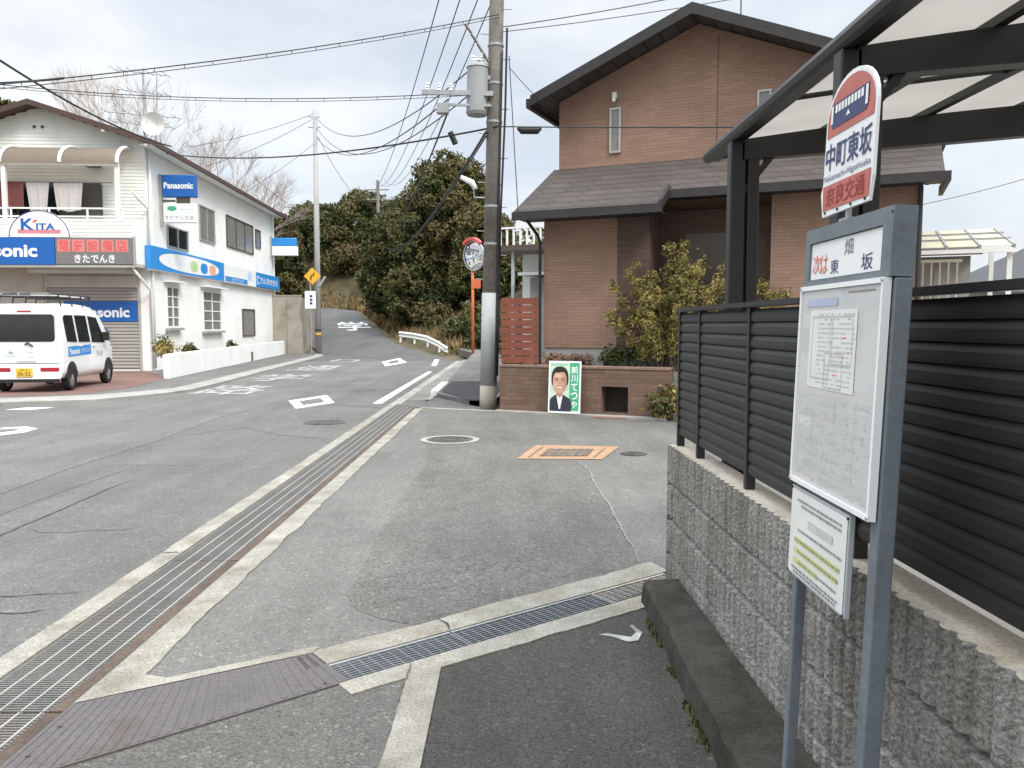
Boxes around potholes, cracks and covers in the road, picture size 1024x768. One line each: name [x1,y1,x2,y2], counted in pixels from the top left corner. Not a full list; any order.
drain grate [268,457,359,495]
drain grate [329,632,471,680]
manhole cover [516,445,619,459]
drain grate [450,593,613,644]
crack [0,465,219,536]
drain grate [0,712,60,766]
drain grate [173,494,315,561]
drain grate [357,417,405,433]
drain grate [591,573,666,603]
crack [0,592,77,614]
drain grate [380,405,417,417]
drain grate [322,433,386,457]
